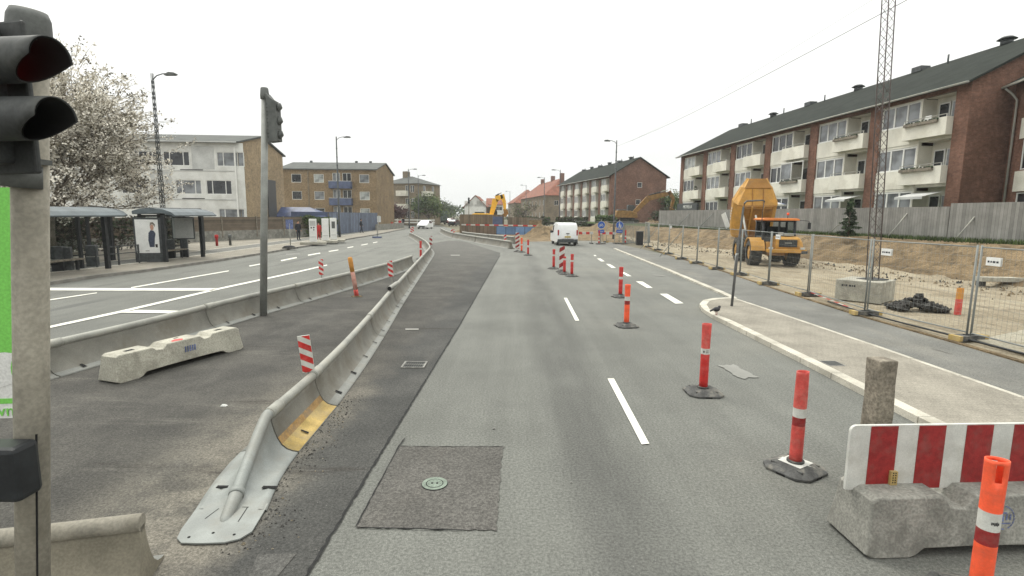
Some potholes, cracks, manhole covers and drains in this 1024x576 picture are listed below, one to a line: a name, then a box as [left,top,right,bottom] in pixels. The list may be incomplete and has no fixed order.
manhole cover [421,477,448,491]
